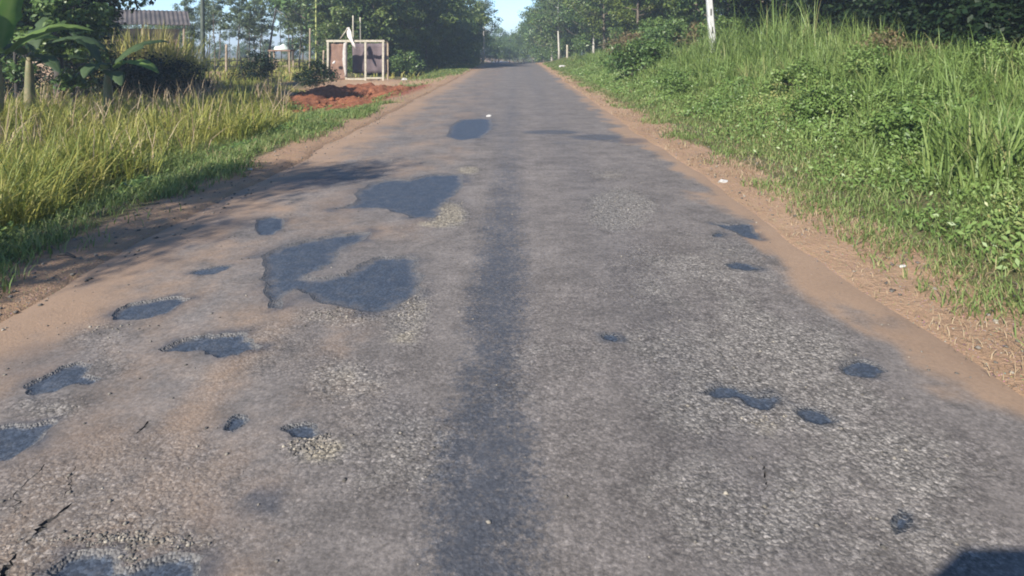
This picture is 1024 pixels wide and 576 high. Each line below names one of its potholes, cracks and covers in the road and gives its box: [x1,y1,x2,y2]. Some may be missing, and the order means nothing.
pothole [158,332,264,358]
pothole [790,406,840,425]
pothole [0,418,58,461]
pothole [838,359,889,378]
pothole [696,382,787,429]
pothole [259,232,433,335]
pothole [18,530,212,576]
pothole [255,216,285,235]
pothole [279,421,339,465]
pothole [711,222,763,240]
pothole [447,119,493,140]
pothole [188,265,233,275]
